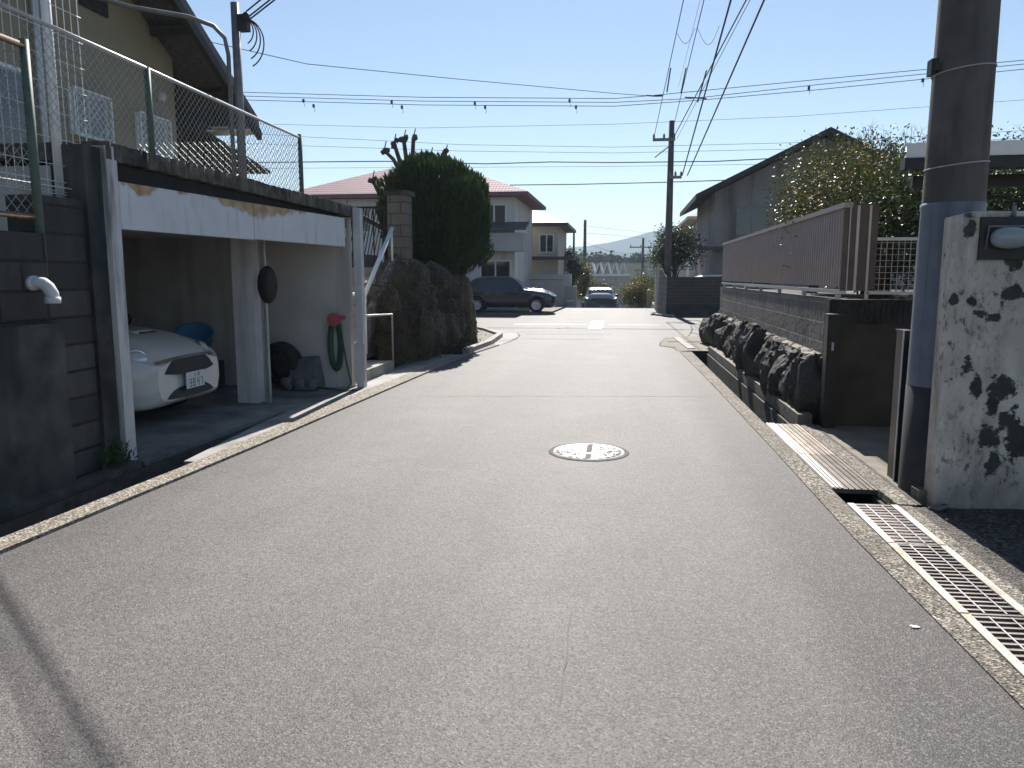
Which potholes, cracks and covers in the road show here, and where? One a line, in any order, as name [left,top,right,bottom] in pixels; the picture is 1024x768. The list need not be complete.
manhole cover [548,443,629,462]
crack [560,611,572,703]
drain grate [847,503,946,546]
